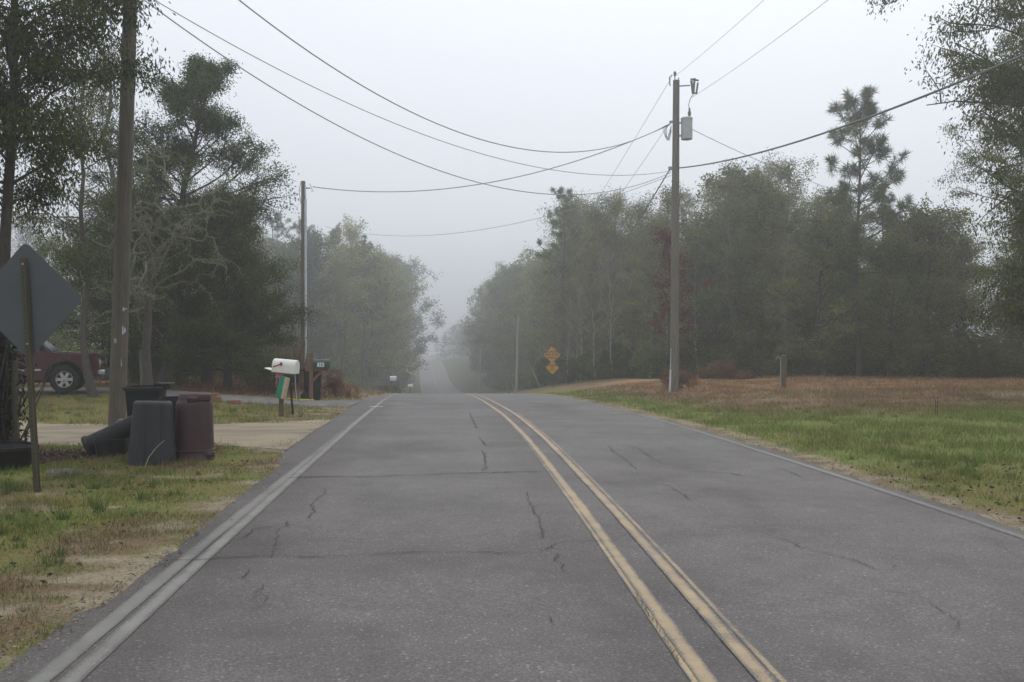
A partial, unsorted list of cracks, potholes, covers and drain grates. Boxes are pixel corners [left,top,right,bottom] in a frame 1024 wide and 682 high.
crack [169,415,604,610]
